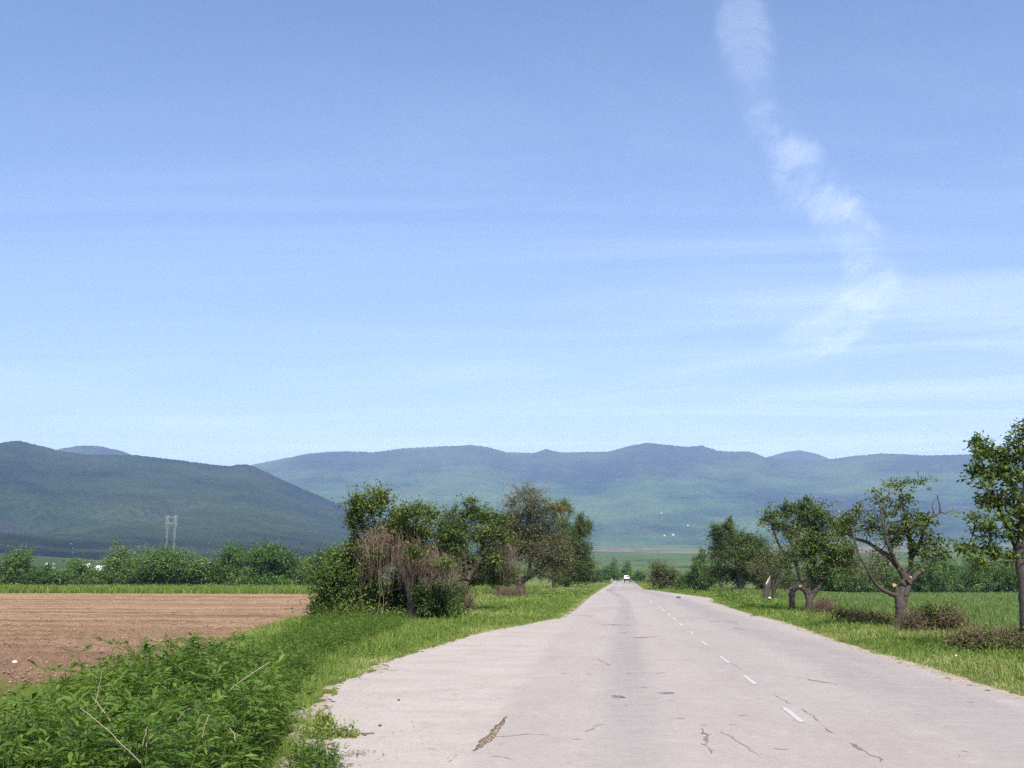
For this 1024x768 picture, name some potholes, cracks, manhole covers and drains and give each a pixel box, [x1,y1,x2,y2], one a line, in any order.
crack [681,715,756,753]
crack [777,696,883,761]
